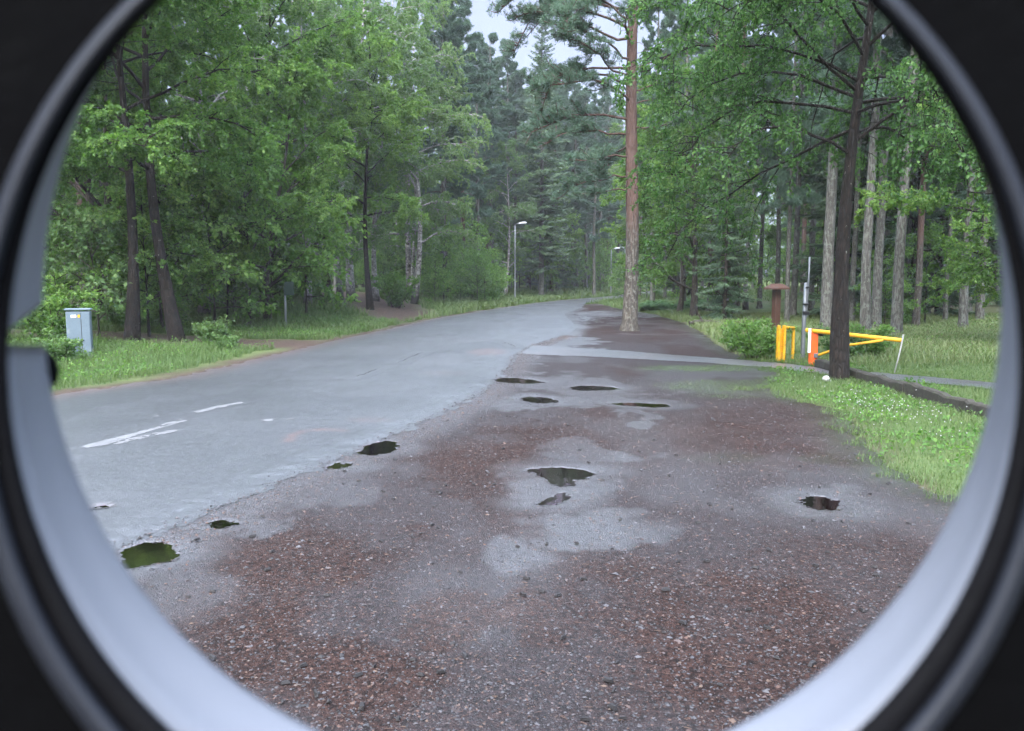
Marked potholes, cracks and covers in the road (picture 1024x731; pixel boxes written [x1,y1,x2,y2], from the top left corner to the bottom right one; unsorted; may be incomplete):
pothole [534,491,574,506]
pothole [321,460,355,470]
pothole [90,501,118,510]
pothole [797,494,845,511]
pothole [199,518,243,530]
pothole [117,539,183,569]
pothole [518,396,561,404]
pothole [353,440,400,456]
pothole [523,466,598,487]
crack [331,351,435,380]
